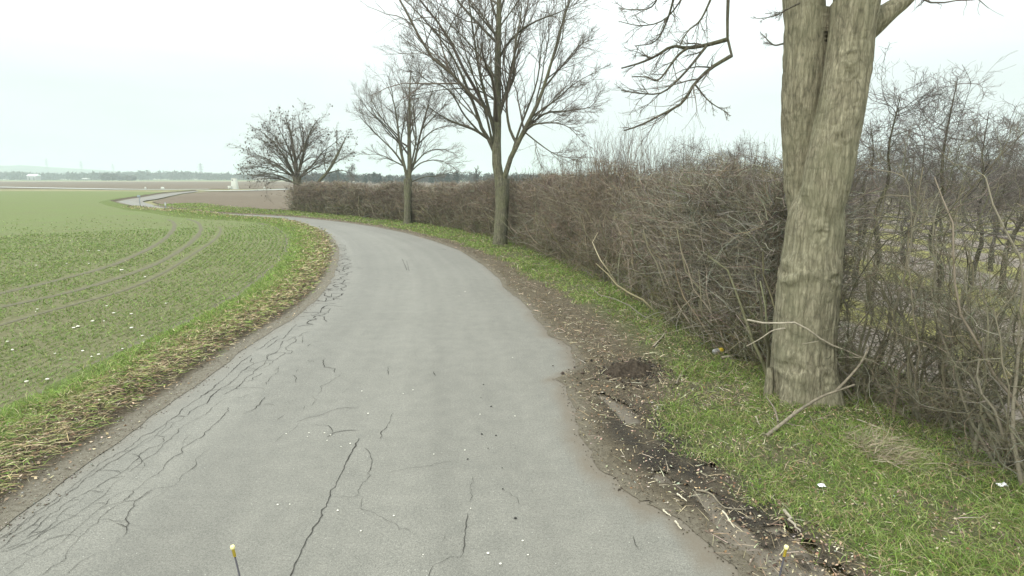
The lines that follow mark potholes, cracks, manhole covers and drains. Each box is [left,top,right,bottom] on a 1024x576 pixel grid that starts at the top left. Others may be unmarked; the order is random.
crack [1,250,351,575]
crack [429,478,473,574]
crack [290,361,447,576]
